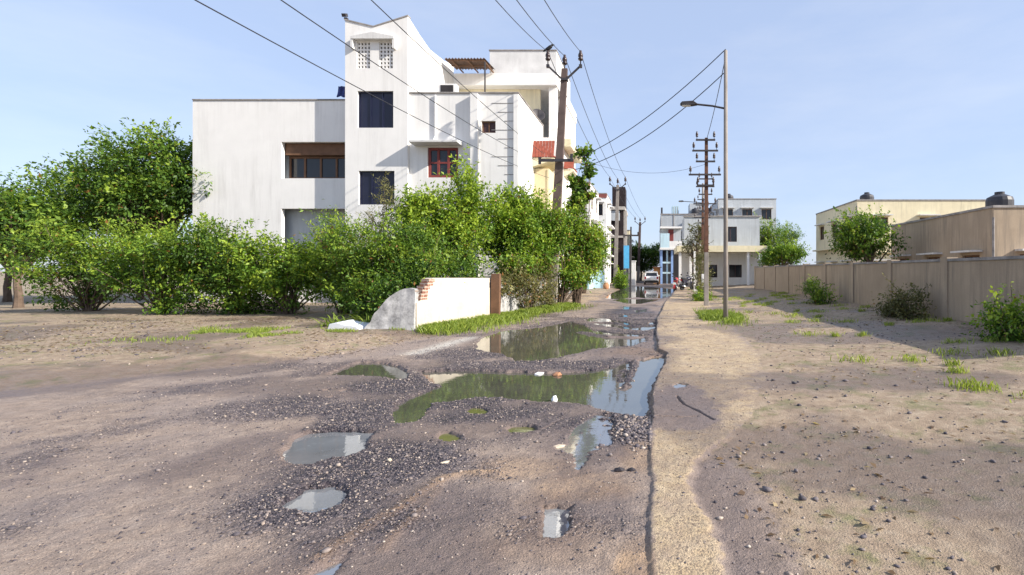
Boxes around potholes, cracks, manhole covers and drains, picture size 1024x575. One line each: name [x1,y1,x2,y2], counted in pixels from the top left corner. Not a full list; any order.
pothole [432,430,465,442]
crack [655,395,715,420]
pothole [387,352,670,424]
pothole [274,480,354,516]
pothole [322,361,414,380]
pothole [501,423,542,433]
pothole [585,318,658,331]
pothole [273,425,381,466]
pothole [553,412,619,473]
pothole [470,320,649,361]
pothole [538,502,577,539]
